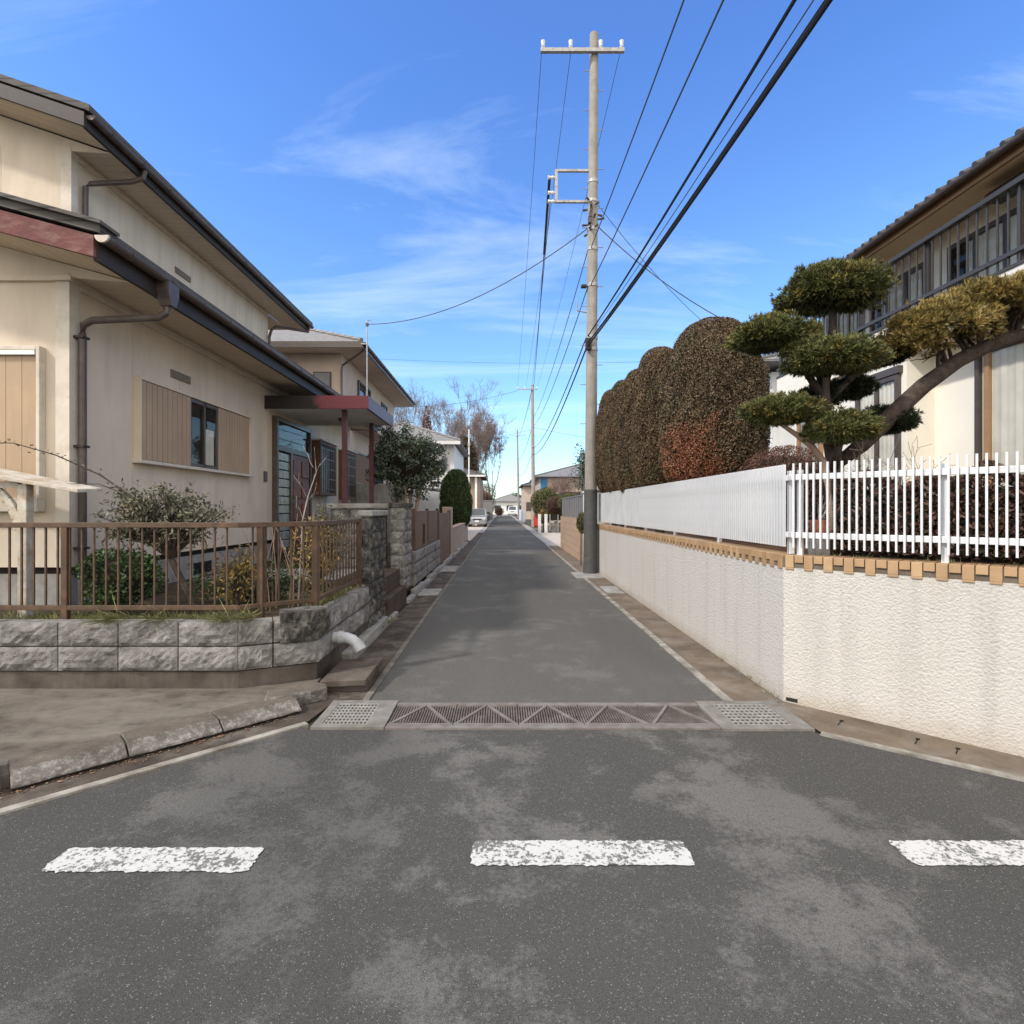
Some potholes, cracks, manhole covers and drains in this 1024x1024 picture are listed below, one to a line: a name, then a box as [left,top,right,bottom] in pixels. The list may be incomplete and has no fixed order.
drain grate [310,700,398,730]
drain grate [695,701,815,733]
